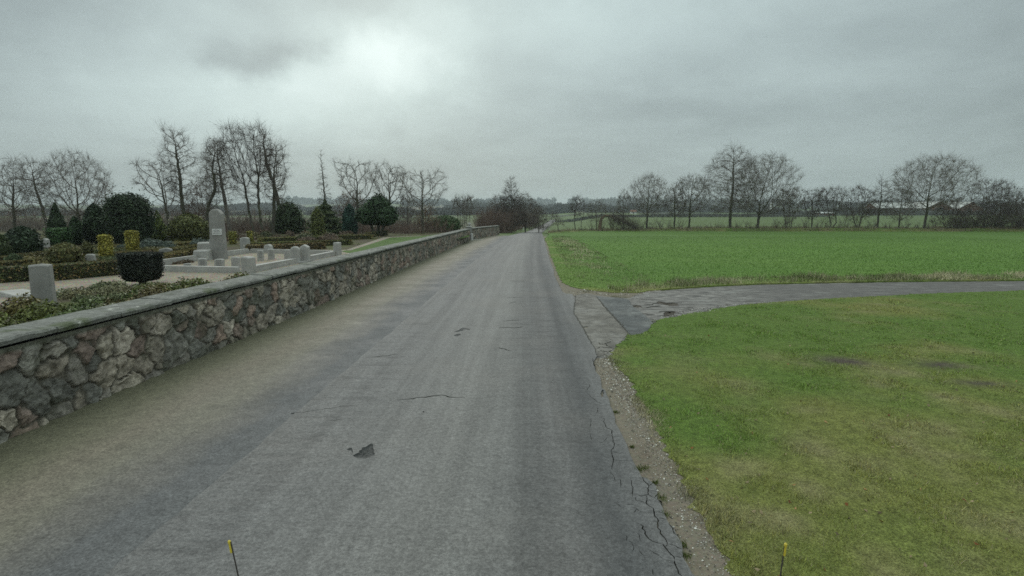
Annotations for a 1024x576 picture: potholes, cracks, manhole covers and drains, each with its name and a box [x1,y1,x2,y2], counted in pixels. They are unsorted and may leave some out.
crack [587,385,682,576]
pothole [353,443,375,459]
